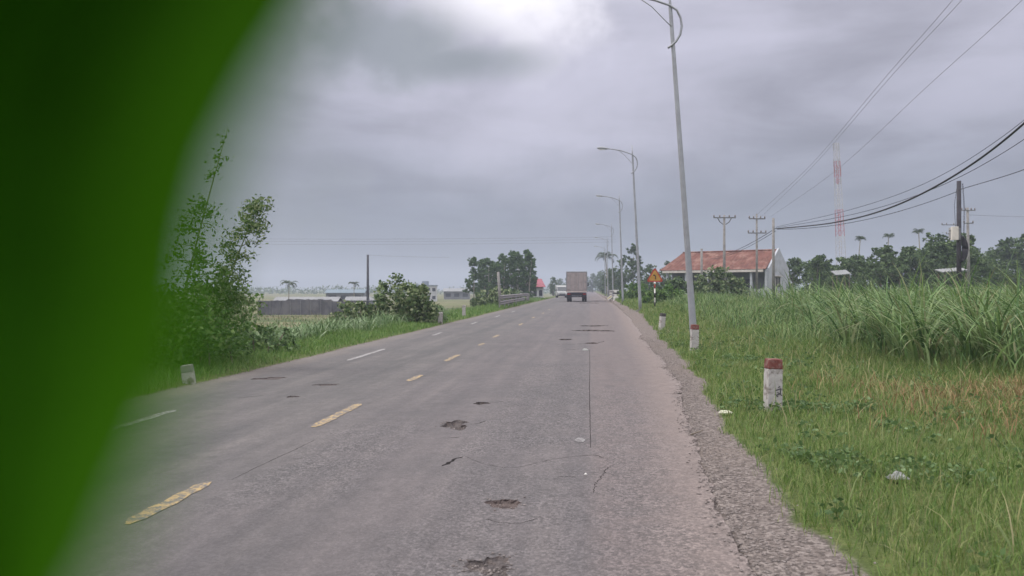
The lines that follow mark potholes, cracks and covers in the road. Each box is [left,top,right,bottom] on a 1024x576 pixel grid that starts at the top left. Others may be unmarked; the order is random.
pothole [429,420,468,433]
crack [442,455,611,493]
pothole [484,496,526,511]
pothole [451,552,518,576]
